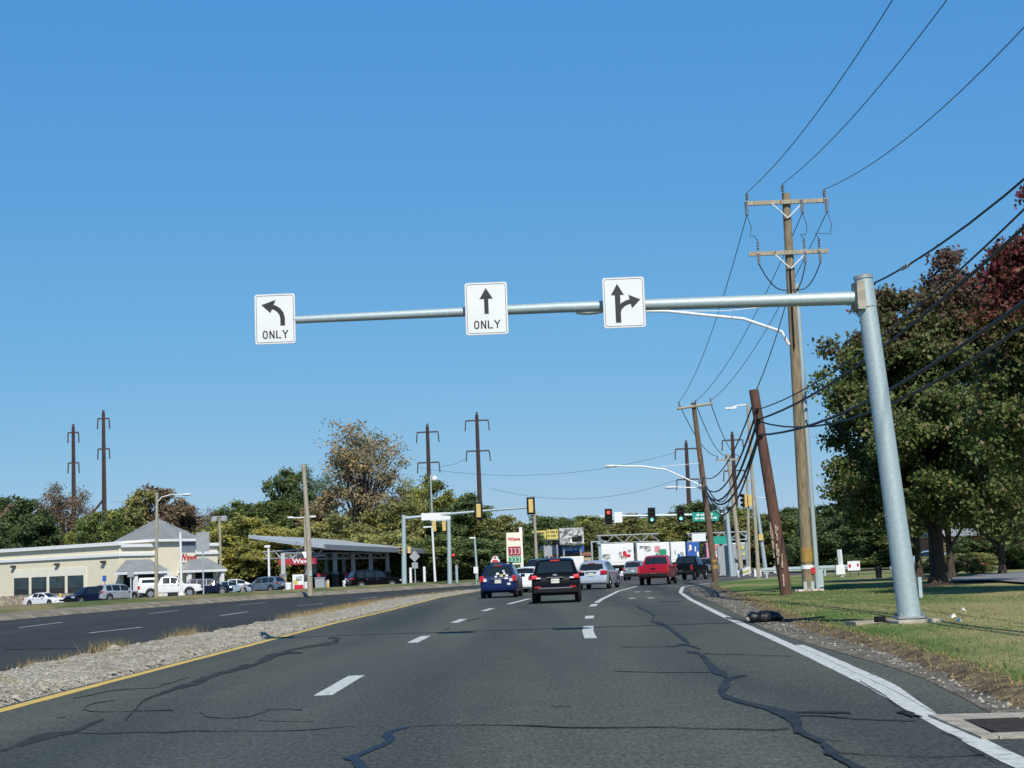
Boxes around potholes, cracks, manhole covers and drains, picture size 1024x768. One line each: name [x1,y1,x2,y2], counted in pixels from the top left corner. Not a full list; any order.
crack [423,601,995,768]
drain grate [928,712,1024,739]
